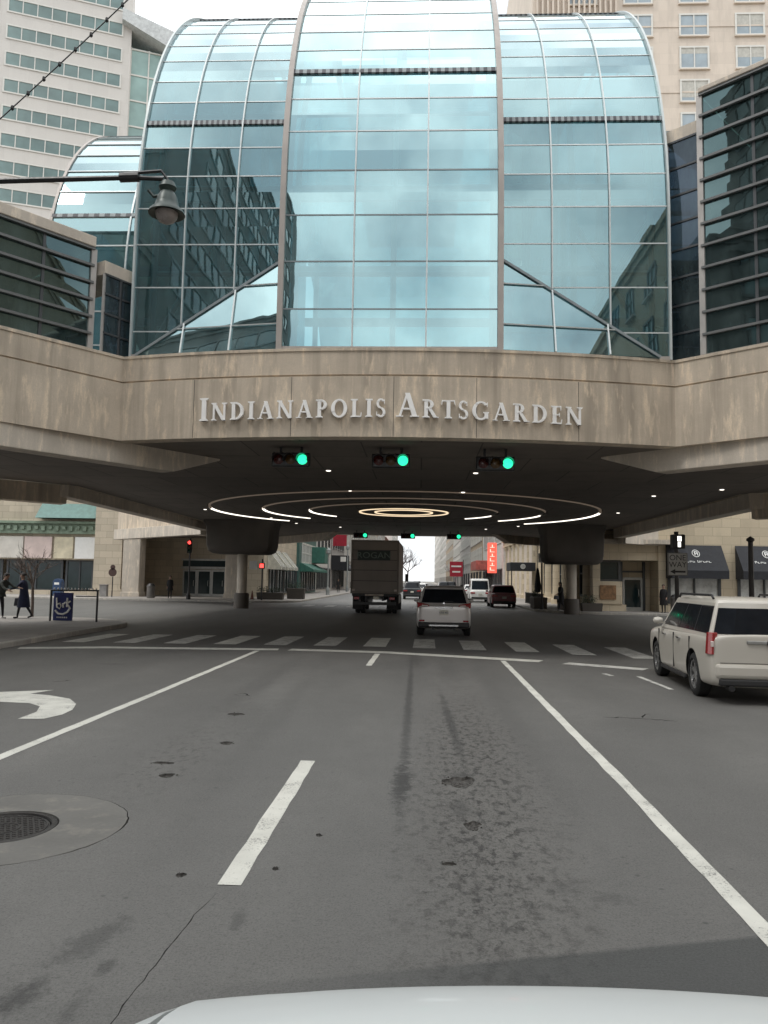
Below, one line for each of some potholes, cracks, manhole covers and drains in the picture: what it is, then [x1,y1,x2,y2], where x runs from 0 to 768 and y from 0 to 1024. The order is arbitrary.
pothole [441,776,475,788]
manhole cover [0,812,58,843]
pothole [463,820,482,831]
